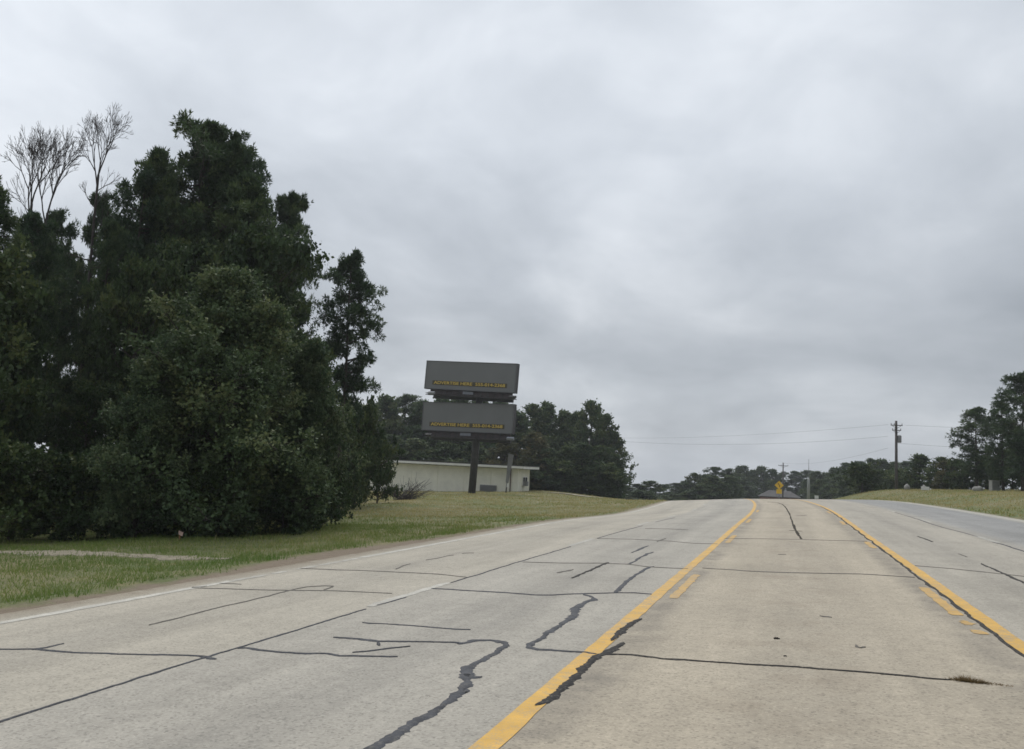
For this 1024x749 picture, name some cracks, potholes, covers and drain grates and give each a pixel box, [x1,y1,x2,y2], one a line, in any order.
crack [0,502,1024,723]
